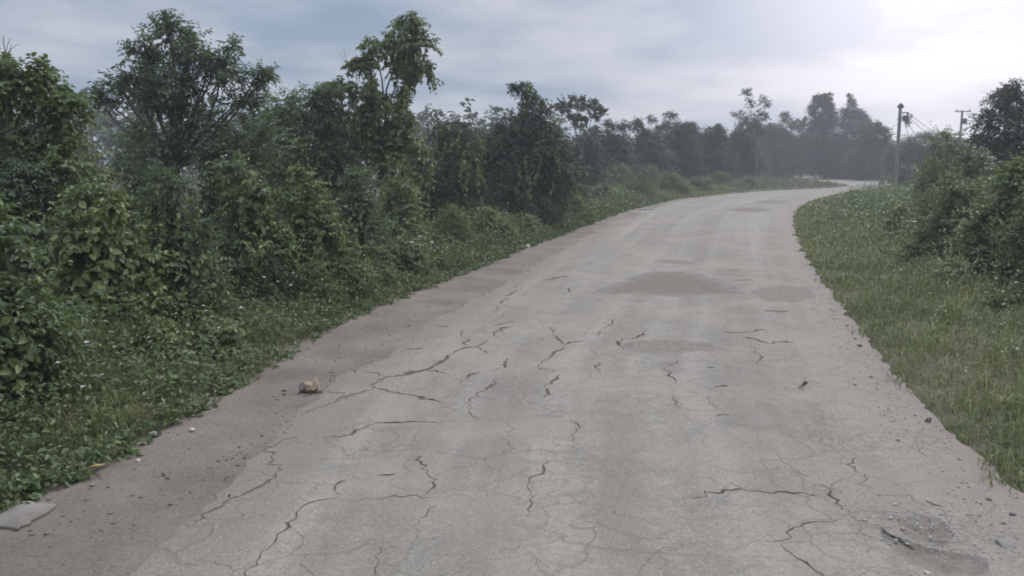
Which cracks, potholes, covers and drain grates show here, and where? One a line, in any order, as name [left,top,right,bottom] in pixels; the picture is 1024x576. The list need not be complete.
pothole [896,515,956,547]
crack [683,456,903,576]
crack [724,329,788,364]
pothole [879,526,990,576]
crack [513,460,548,516]
crack [300,286,517,419]
crack [537,318,645,398]
crack [663,361,680,407]
crack [188,437,472,576]
crack [331,421,442,437]
